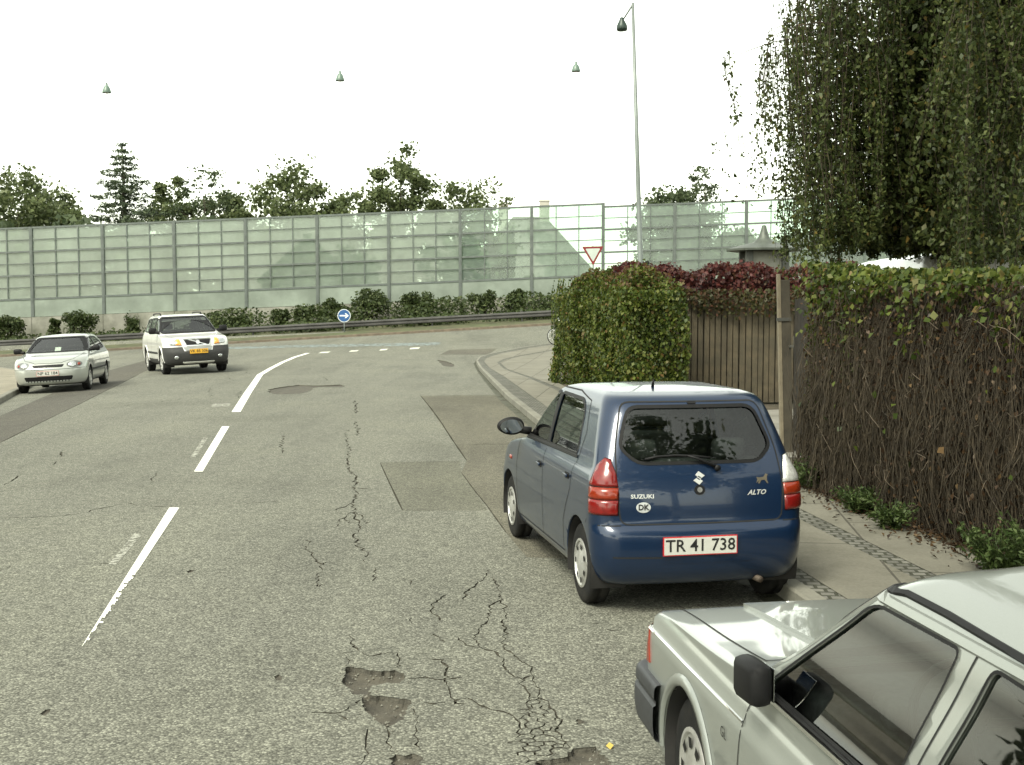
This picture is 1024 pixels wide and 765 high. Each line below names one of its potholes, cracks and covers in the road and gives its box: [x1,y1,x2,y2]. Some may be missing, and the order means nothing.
crack [311,571,571,764]
crack [305,540,328,587]
pothole [535,743,619,765]
pothole [327,664,425,732]
crack [336,401,377,581]
pothole [380,747,437,765]
